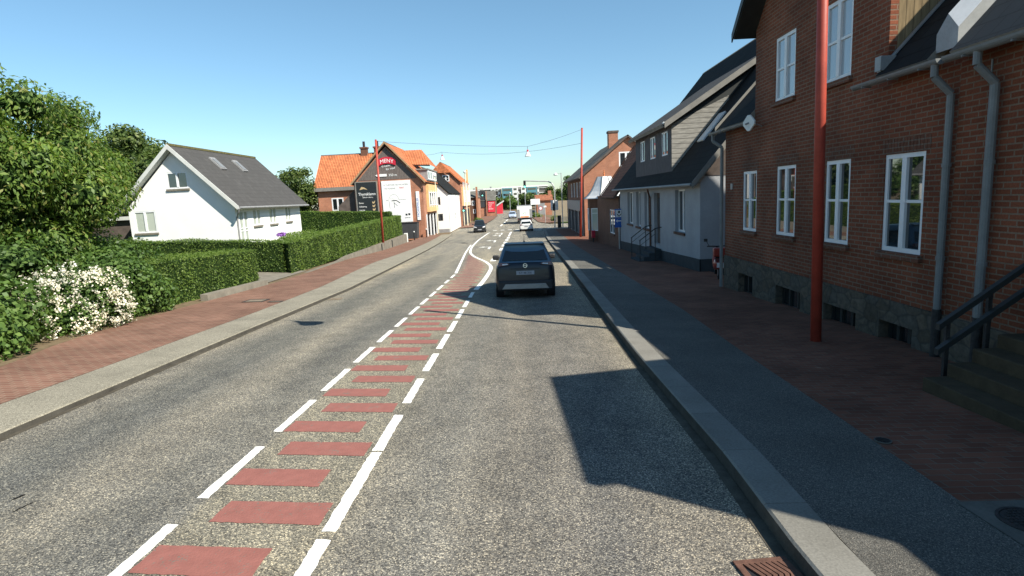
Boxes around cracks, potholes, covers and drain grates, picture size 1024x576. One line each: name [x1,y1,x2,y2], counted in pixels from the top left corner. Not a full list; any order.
manhole cover [955,500,1024,545]
drain grate [732,556,803,576]
